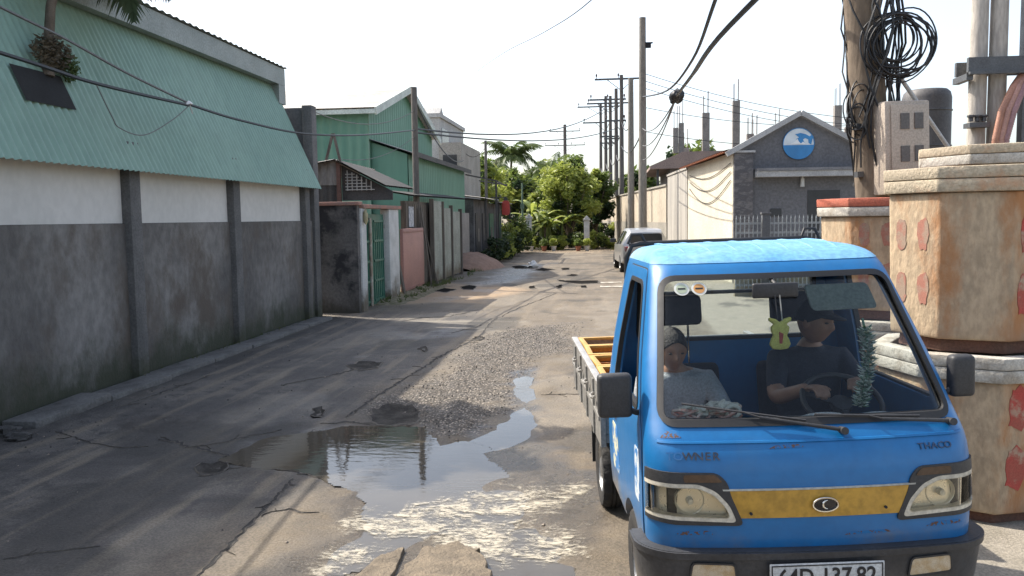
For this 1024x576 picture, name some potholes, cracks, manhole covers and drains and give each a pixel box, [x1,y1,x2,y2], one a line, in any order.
pothole [345,361,384,371]
crack [261,508,317,517]
pothole [218,425,576,576]
crack [55,430,323,479]
pothole [194,461,230,476]
pothole [368,403,423,427]
crack [3,546,100,560]
pothole [310,406,326,417]
